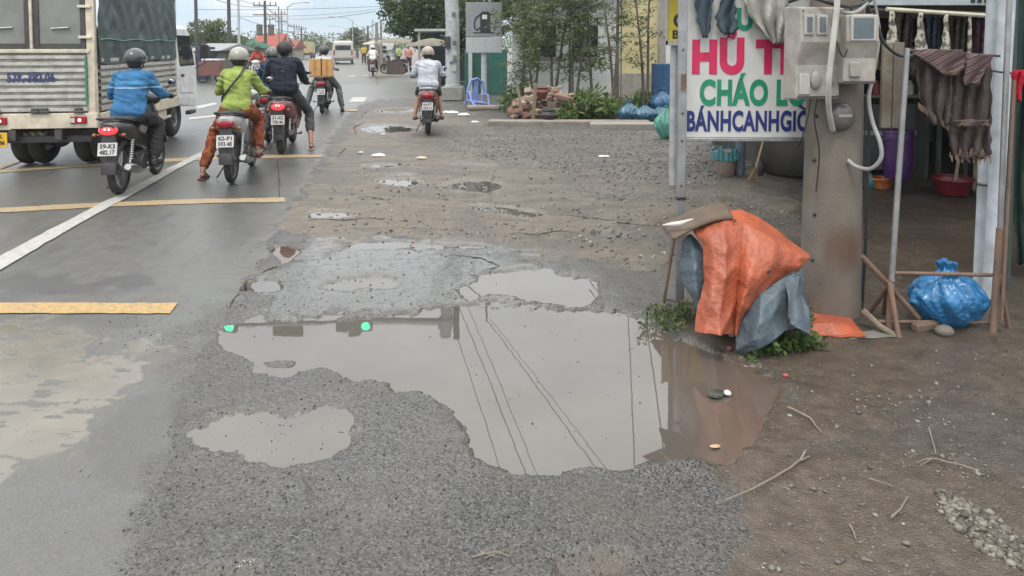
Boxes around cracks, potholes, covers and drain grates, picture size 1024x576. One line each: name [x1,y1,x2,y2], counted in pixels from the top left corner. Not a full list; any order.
pothole [376,176,425,187]
pothole [216,290,780,476]
pothole [306,208,357,219]
pothole [441,178,506,193]
pothole [246,276,285,294]
pothole [270,243,301,264]
pothole [471,202,548,217]
pothole [457,264,604,307]
pothole [184,396,368,472]
pothole [360,122,424,133]
